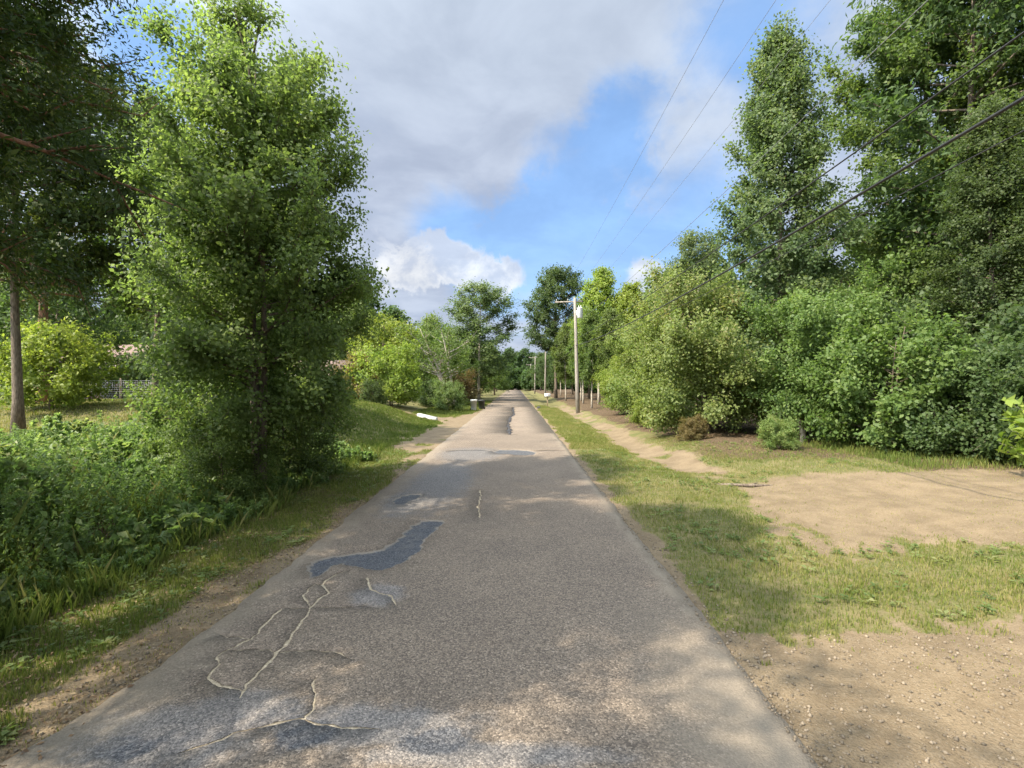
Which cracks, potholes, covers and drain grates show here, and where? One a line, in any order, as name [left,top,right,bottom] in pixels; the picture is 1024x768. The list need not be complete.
crack [366,577,396,605]
crack [177,570,377,754]
